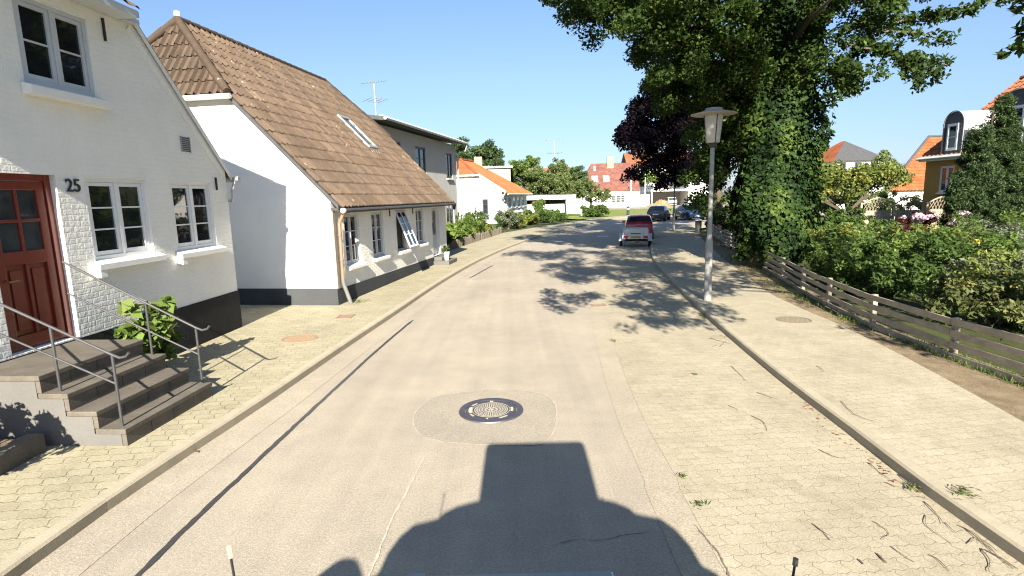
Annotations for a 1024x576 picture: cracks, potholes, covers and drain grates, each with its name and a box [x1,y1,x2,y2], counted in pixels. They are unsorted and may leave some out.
manhole cover [281,334,318,343]
crack [135,320,427,576]
manhole cover [776,316,813,324]
manhole cover [459,398,523,424]
crack [695,525,730,576]
